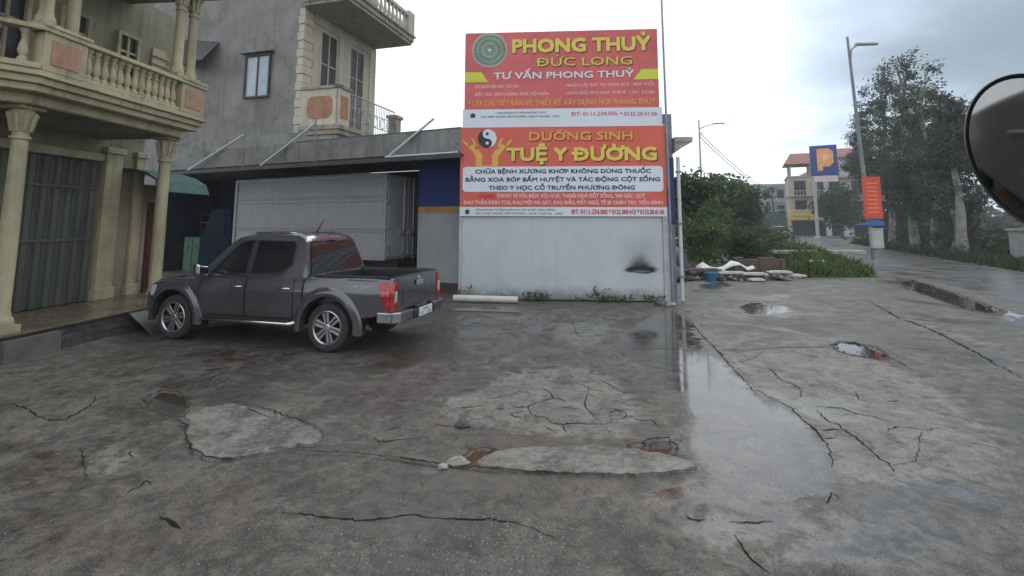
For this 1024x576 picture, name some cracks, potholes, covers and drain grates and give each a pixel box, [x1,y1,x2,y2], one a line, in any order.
crack [166,406,697,476]
crack [12,396,96,421]
pothole [141,389,192,416]
pothole [448,446,497,469]
pothole [627,436,679,455]
crack [282,511,557,540]
crack [468,379,657,432]
crack [685,315,932,471]
crack [792,299,1021,378]
crack [731,521,768,572]
pothole [829,341,893,360]
